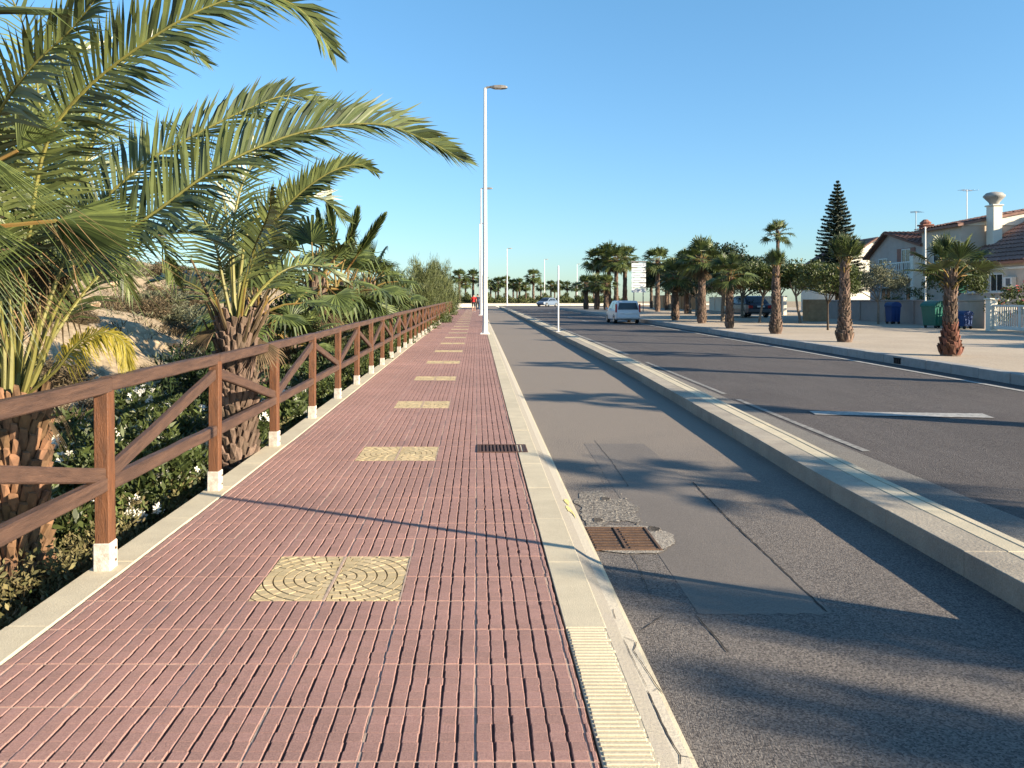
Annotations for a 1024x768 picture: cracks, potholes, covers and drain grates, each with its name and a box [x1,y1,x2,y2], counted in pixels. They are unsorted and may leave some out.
drain grate [584,527,663,551]
drain grate [477,444,528,453]
crack [624,614,694,764]
